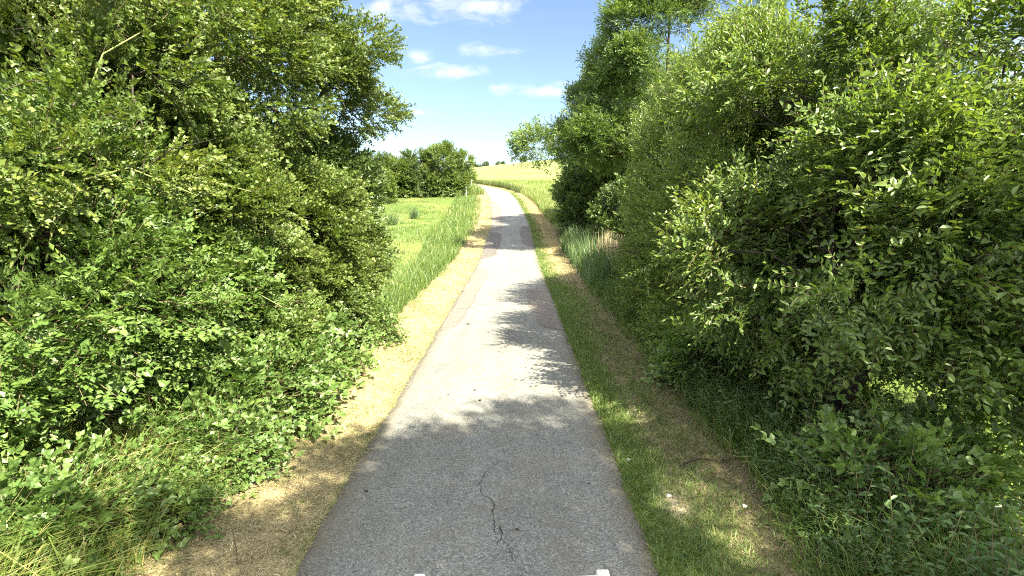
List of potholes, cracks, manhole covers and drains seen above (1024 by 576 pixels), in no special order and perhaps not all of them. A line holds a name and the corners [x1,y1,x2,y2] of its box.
crack [477,461,513,555]
